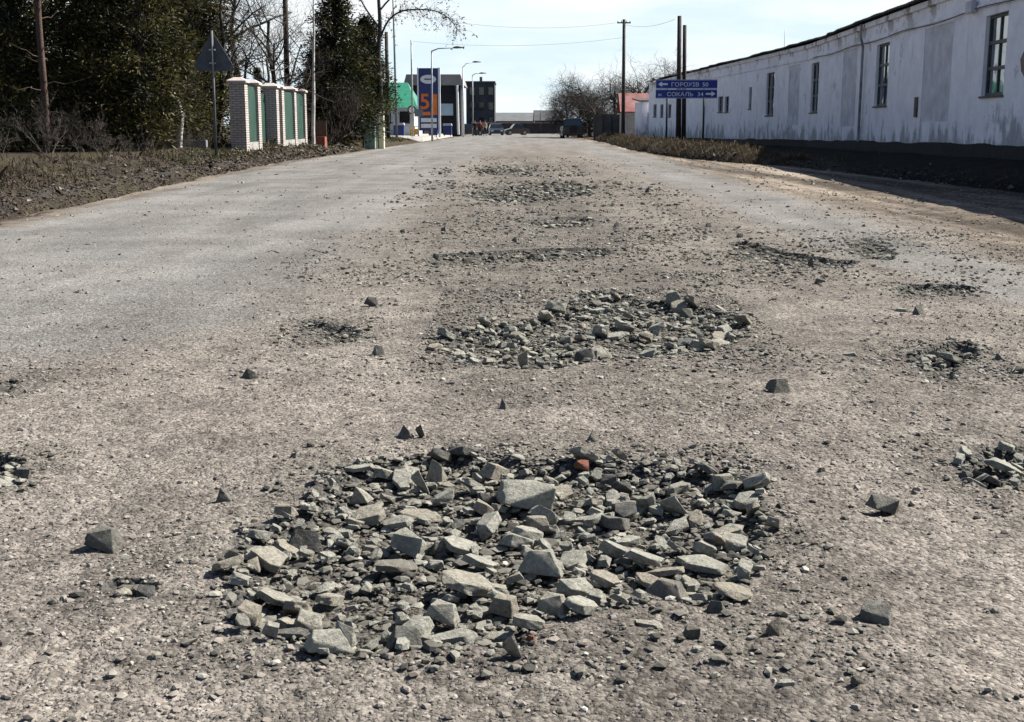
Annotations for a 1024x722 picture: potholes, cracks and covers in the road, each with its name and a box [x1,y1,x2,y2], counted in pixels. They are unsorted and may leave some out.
pothole [728,241,861,268]
pothole [846,238,900,260]
pothole [909,341,982,380]
pothole [0,452,31,487]
pothole [419,248,615,265]
pothole [958,446,1024,490]
pothole [471,183,594,201]
pothole [222,452,773,664]
pothole [298,320,363,343]
pothole [891,284,980,296]
pothole [435,290,752,370]
